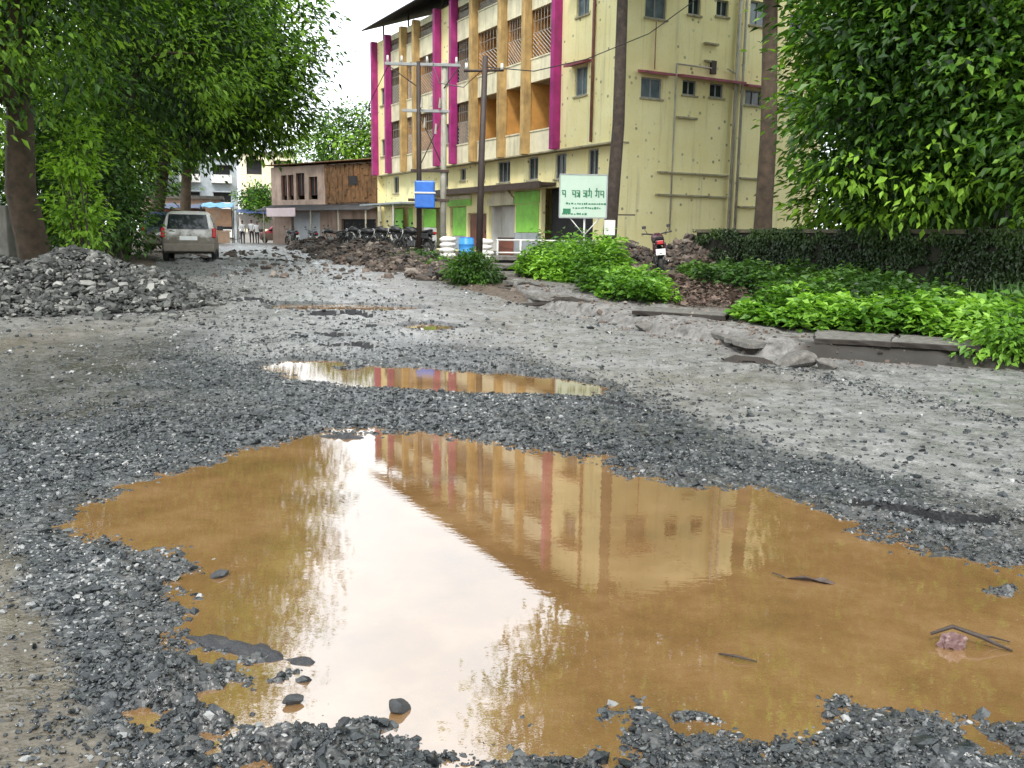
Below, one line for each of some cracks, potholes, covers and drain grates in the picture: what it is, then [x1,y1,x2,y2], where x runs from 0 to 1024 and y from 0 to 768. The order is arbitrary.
pothole [260,301,431,311]
pothole [393,320,467,330]
pothole [46,426,1024,768]
crack [847,498,1024,525]
pothole [250,356,627,397]
